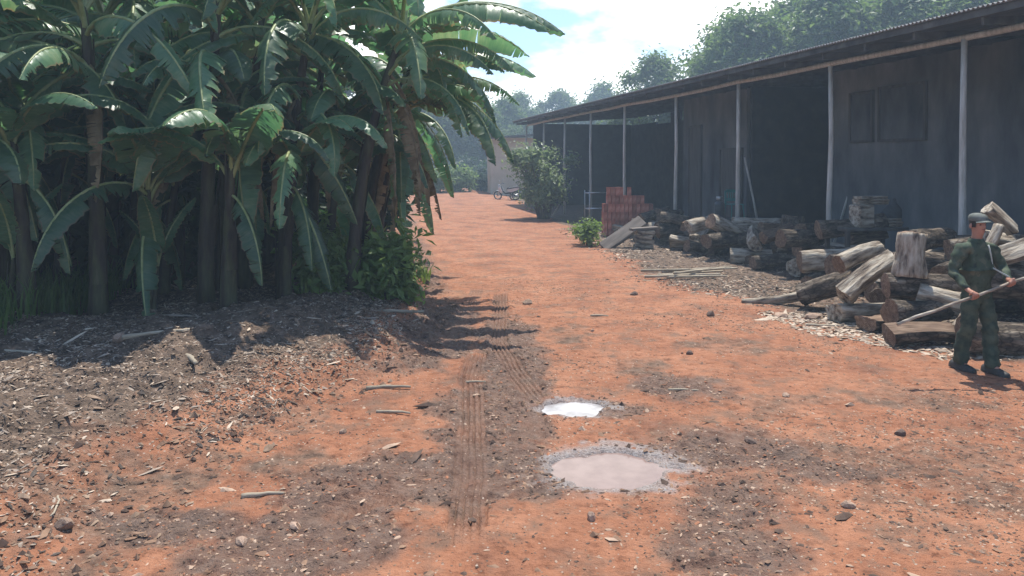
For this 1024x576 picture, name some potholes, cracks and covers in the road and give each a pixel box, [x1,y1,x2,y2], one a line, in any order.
pothole [533,396,610,419]
pothole [542,446,690,493]
